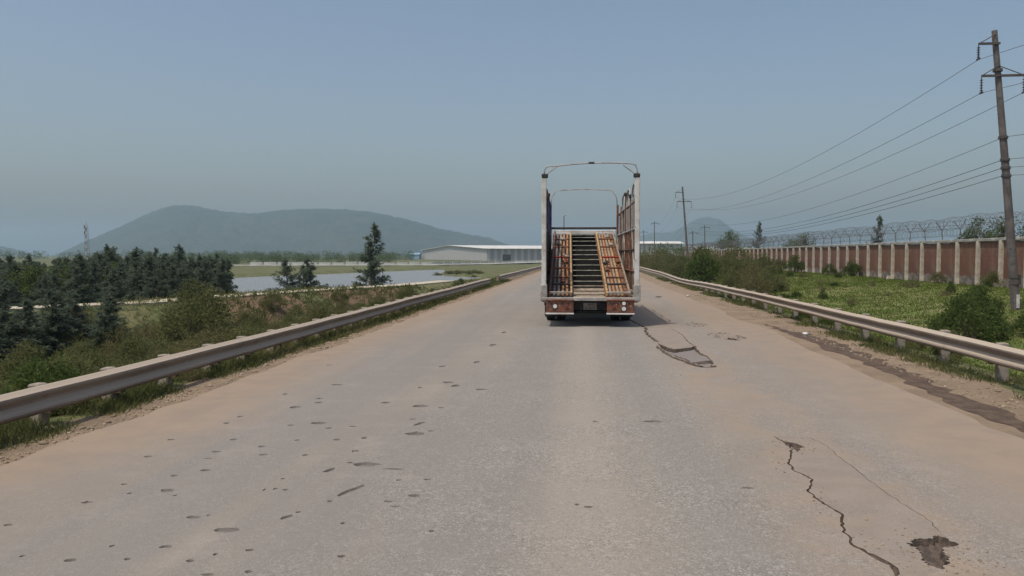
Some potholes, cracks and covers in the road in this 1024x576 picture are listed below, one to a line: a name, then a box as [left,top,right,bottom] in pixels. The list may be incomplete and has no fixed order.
pothole [659,344,714,367]
pothole [907,535,959,569]
crack [773,436,940,576]
